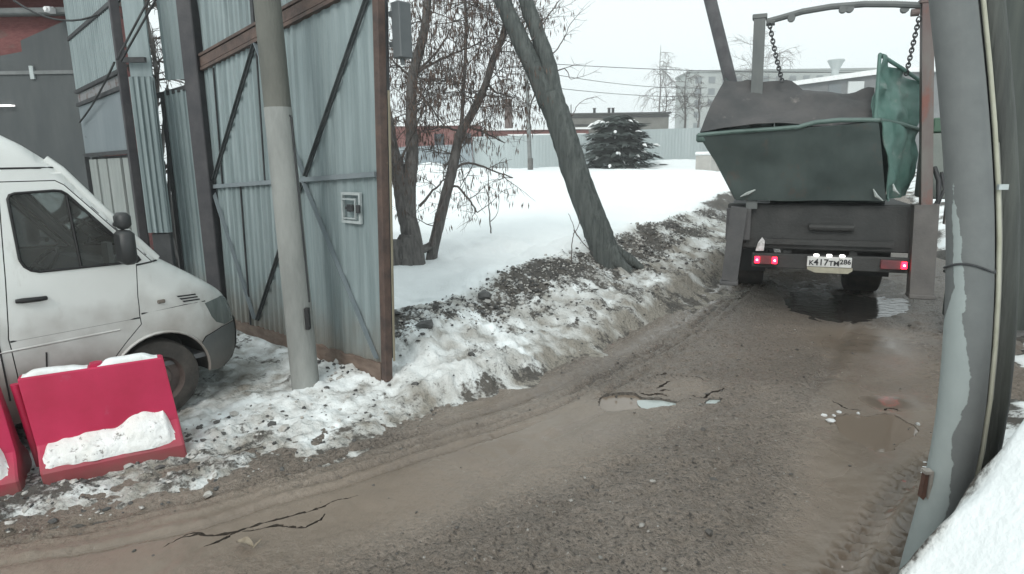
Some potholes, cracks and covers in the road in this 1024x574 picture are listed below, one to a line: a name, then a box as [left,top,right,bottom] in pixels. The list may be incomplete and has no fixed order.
pothole [598,392,677,412]
crack [164,495,358,547]
pothole [833,413,919,452]
